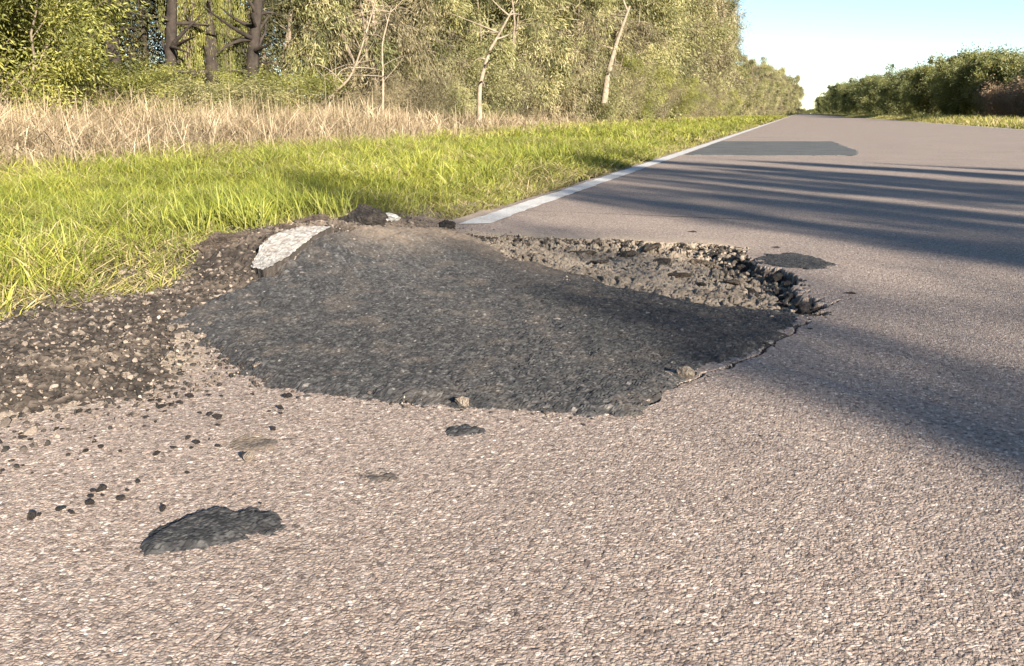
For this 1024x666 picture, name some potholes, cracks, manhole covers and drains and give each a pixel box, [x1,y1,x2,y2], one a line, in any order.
pothole [465,232,814,317]
